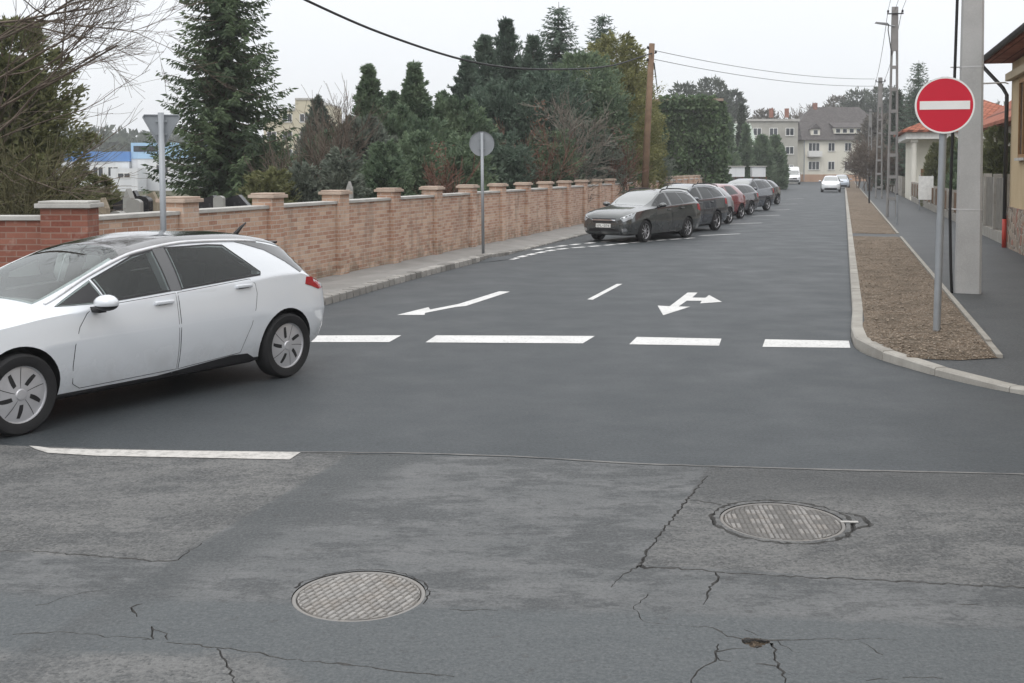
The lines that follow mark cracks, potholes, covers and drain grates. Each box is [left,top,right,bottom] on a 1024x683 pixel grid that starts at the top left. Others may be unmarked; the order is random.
crack [0,544,201,562]
manhole cover [720,503,859,541]
crack [13,603,455,683]
crack [611,476,1023,683]
manhole cover [292,572,426,622]
